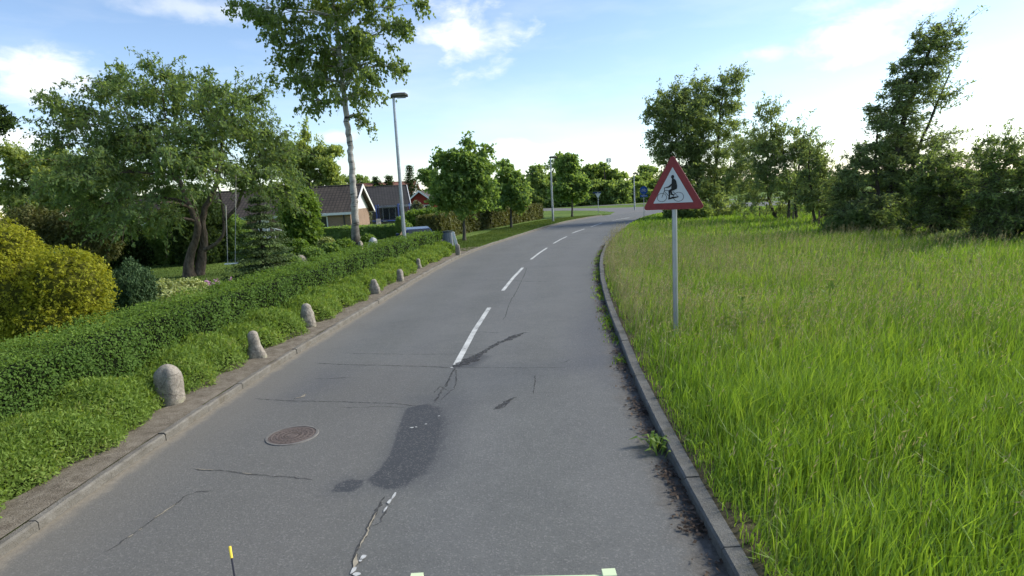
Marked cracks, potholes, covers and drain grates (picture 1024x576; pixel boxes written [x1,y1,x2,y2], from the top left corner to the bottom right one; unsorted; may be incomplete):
crack [109,491,206,550]
manhole cover [265,425,319,446]
crack [197,469,311,480]
crack [267,353,554,408]
crack [351,497,391,568]
